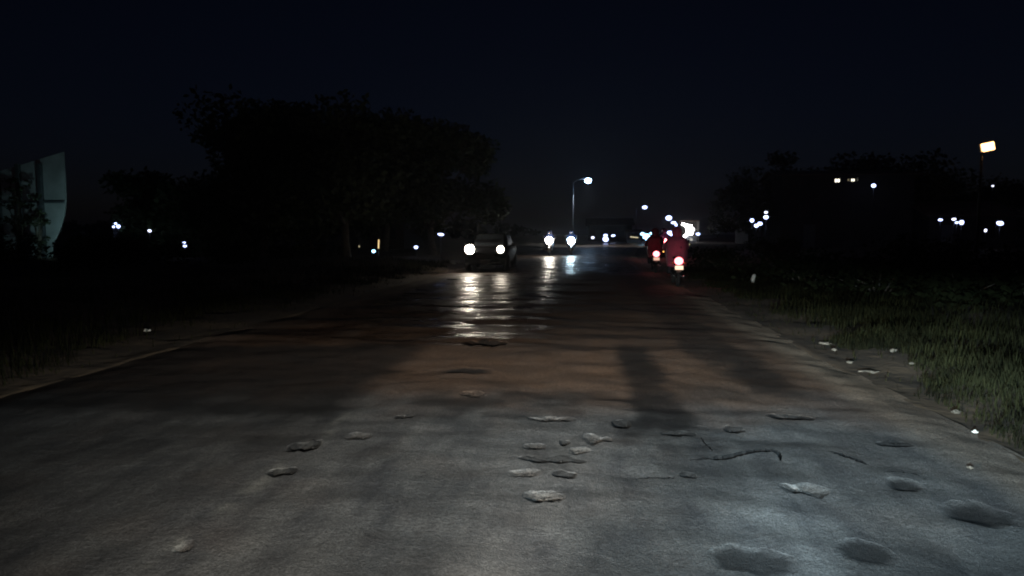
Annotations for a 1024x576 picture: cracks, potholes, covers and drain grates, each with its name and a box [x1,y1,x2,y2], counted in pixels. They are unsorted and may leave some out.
pothole [765,413,815,421]
crack [632,437,782,480]
pothole [937,499,1024,529]
pothole [778,482,831,499]
pothole [884,477,927,492]
pothole [171,539,195,553]
crack [830,451,868,465]
pothole [705,543,799,576]
pothole [436,366,496,375]
pothole [265,467,299,477]
pothole [582,433,612,445]
pothole [506,468,541,478]
